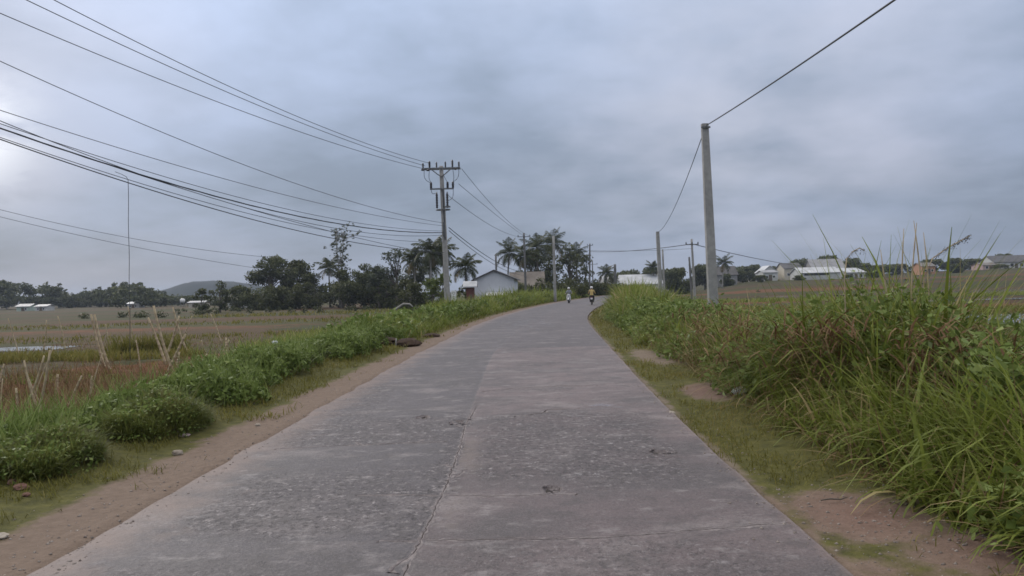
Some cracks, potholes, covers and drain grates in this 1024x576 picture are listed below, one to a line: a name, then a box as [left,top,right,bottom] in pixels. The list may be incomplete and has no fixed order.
pothole [539,484,567,495]
